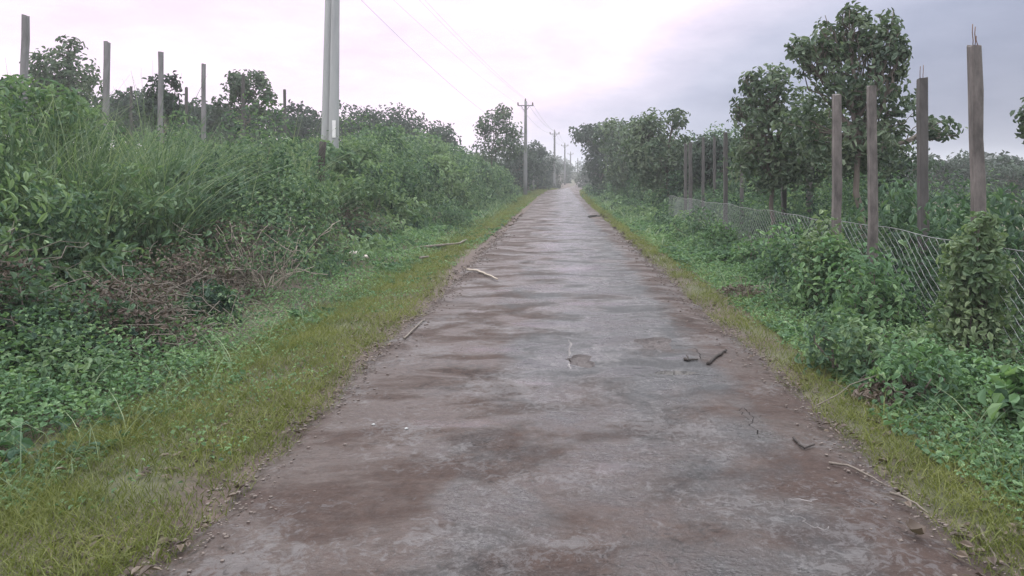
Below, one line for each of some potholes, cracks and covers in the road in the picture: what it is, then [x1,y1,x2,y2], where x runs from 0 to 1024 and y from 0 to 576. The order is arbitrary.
crack [739,407,763,439]
pothole [566,354,595,368]
crack [782,498,829,530]
